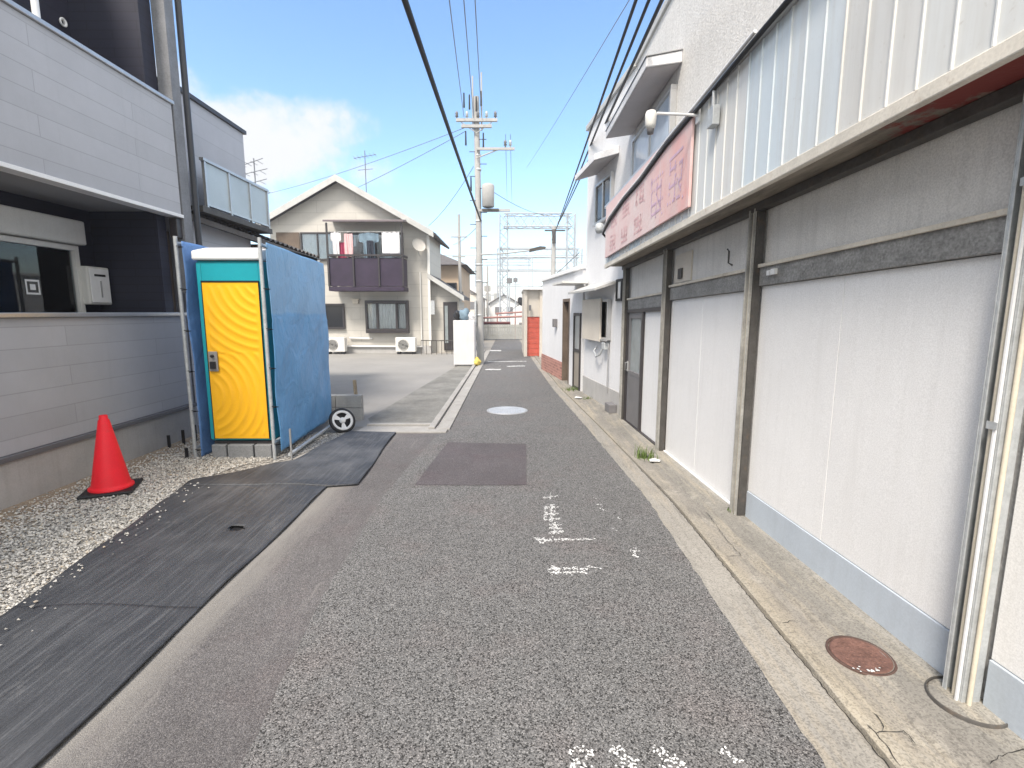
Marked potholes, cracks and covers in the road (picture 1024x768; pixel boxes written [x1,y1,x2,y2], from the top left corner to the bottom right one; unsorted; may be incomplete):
manhole cover [487,406,528,415]
manhole cover [825,635,898,676]
